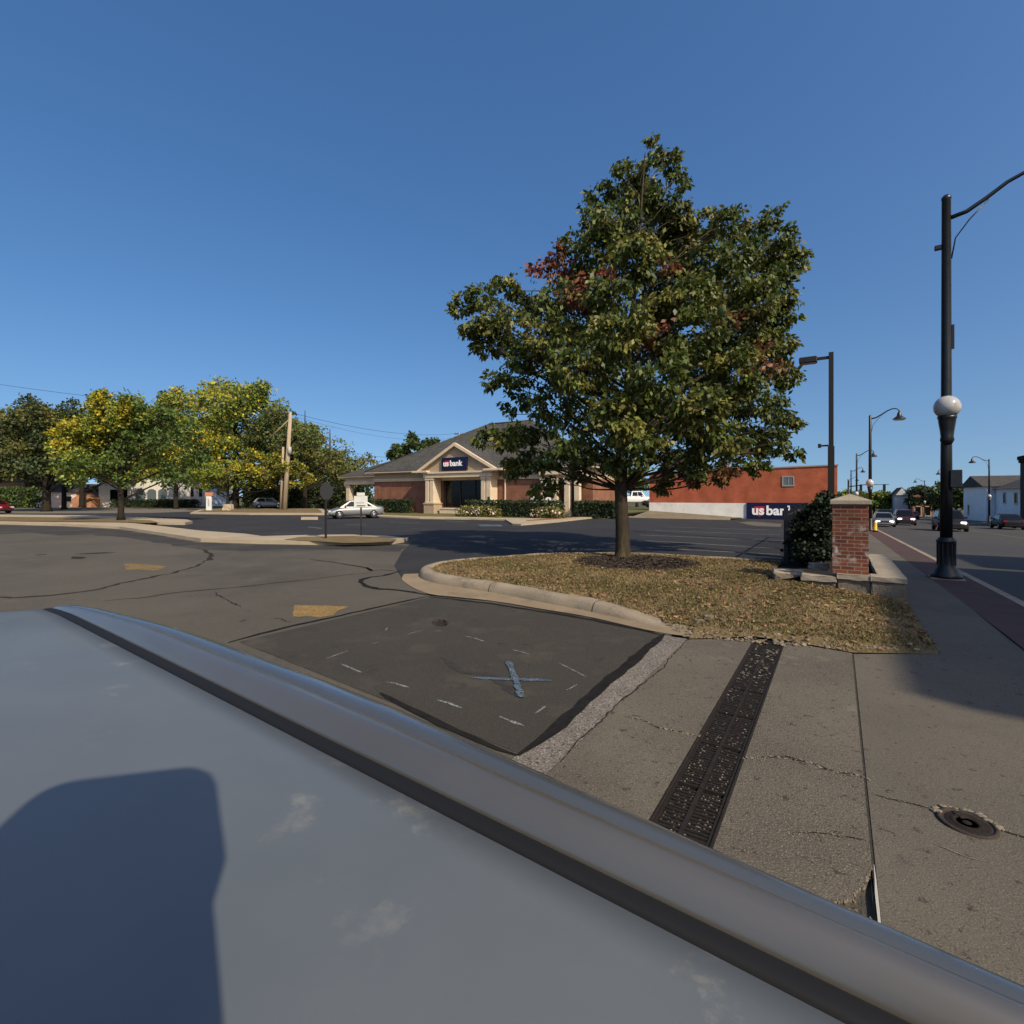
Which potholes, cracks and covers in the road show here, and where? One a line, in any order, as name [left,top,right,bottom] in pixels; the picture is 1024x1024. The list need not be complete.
crack [1,548,372,622]
pothole [431,619,449,627]
crack [560,639,701,764]
crack [742,754,1024,839]
manhole cover [931,804,1005,840]
